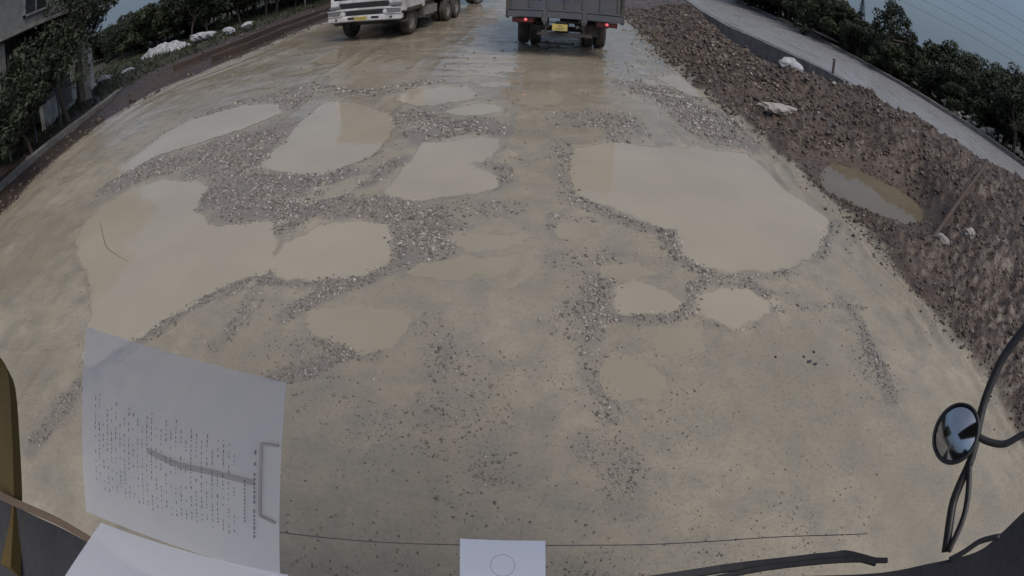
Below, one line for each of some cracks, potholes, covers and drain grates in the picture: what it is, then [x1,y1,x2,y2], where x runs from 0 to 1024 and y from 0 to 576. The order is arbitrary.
pothole [690,277,793,342]
pothole [377,134,504,203]
pothole [444,101,509,117]
pothole [257,100,400,176]
pothole [393,84,481,107]
pothole [596,352,670,403]
pothole [566,140,833,281]
pothole [72,174,294,366]
pothole [271,219,399,283]
pothole [608,279,685,318]
pothole [94,102,289,192]
pothole [302,303,417,357]
